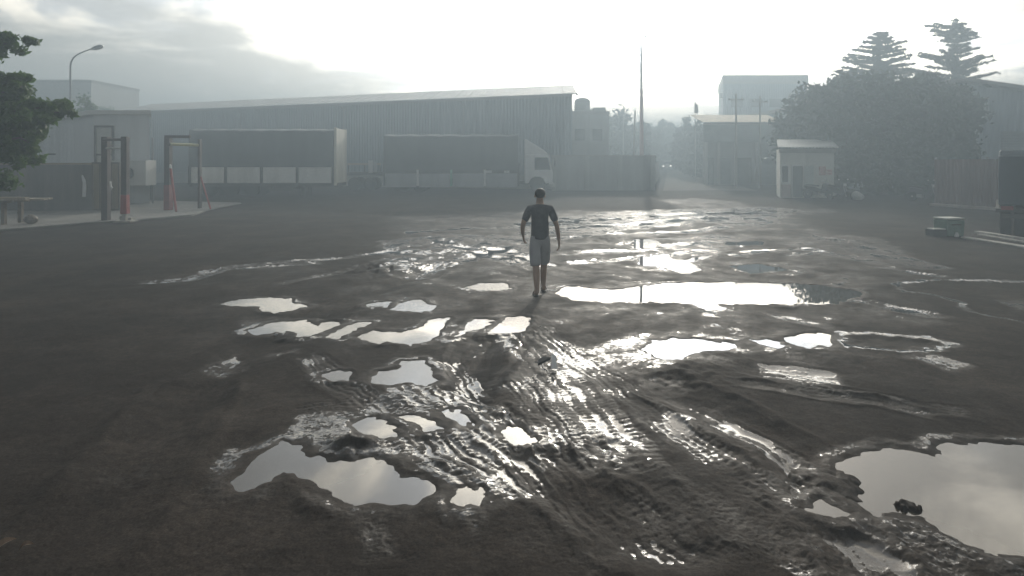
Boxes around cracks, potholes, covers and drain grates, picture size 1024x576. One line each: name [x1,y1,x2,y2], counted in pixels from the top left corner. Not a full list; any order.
pothole [774,329,843,349]
pothole [548,281,867,307]
pothole [349,316,457,348]
pothole [361,356,449,389]
pothole [215,296,314,314]
pothole [338,413,412,441]
pothole [635,336,744,361]
pothole [239,318,352,340]
pothole [817,435,1024,565]
pothole [214,435,452,514]
pothole [388,410,456,436]
pothole [321,320,377,340]
